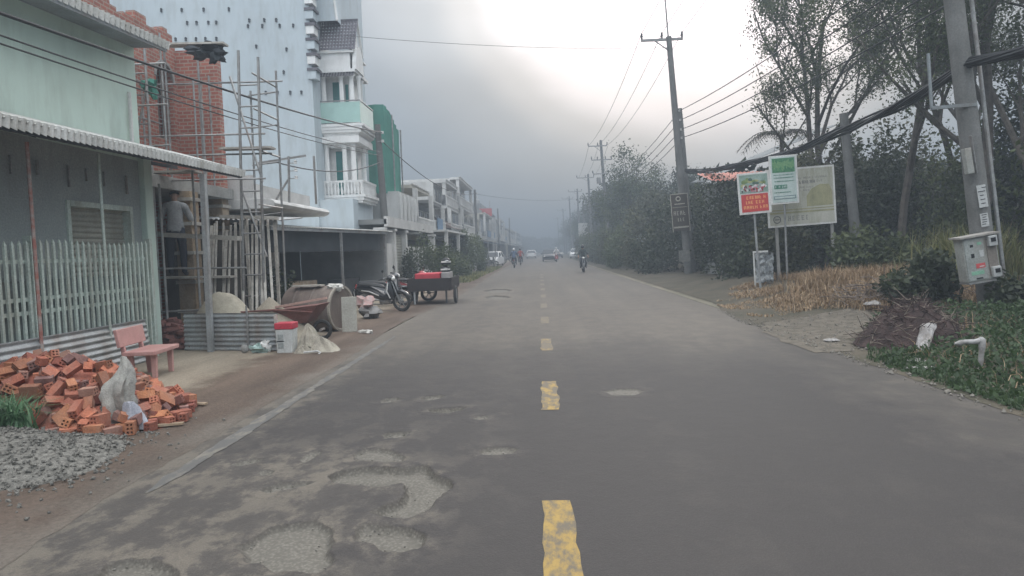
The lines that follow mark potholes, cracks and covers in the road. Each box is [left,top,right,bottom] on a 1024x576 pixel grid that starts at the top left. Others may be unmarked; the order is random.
pothole [464,443,532,459]
pothole [213,512,361,576]
pothole [416,404,479,416]
pothole [345,516,449,563]
pothole [312,460,471,521]
pothole [411,392,458,403]
pothole [366,428,424,443]
pothole [593,386,656,398]
pothole [370,395,411,405]
pothole [461,413,502,423]
pothole [72,547,210,576]
